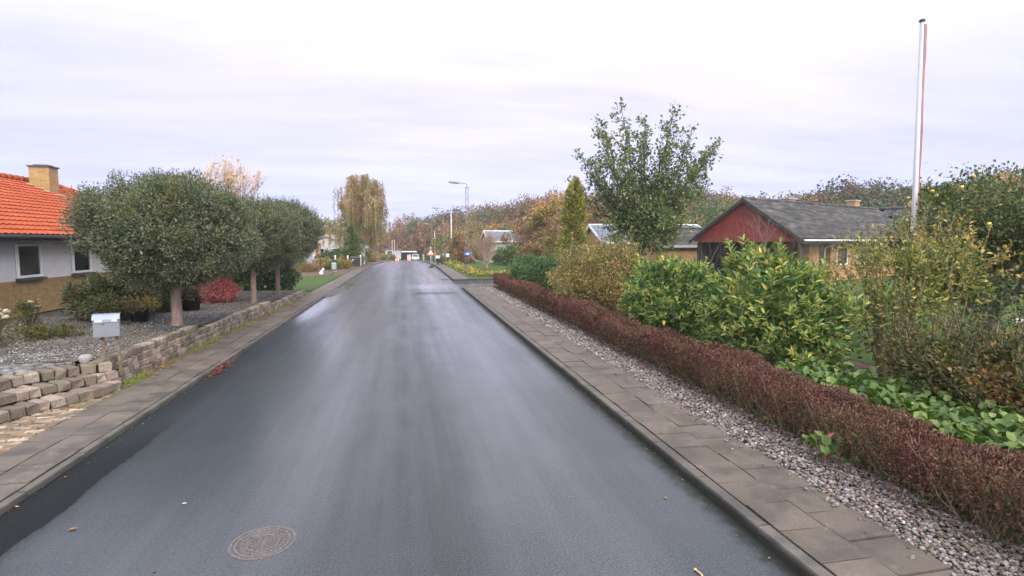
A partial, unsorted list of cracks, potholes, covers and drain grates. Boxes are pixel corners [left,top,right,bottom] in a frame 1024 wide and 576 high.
manhole cover [228,526,297,560]
